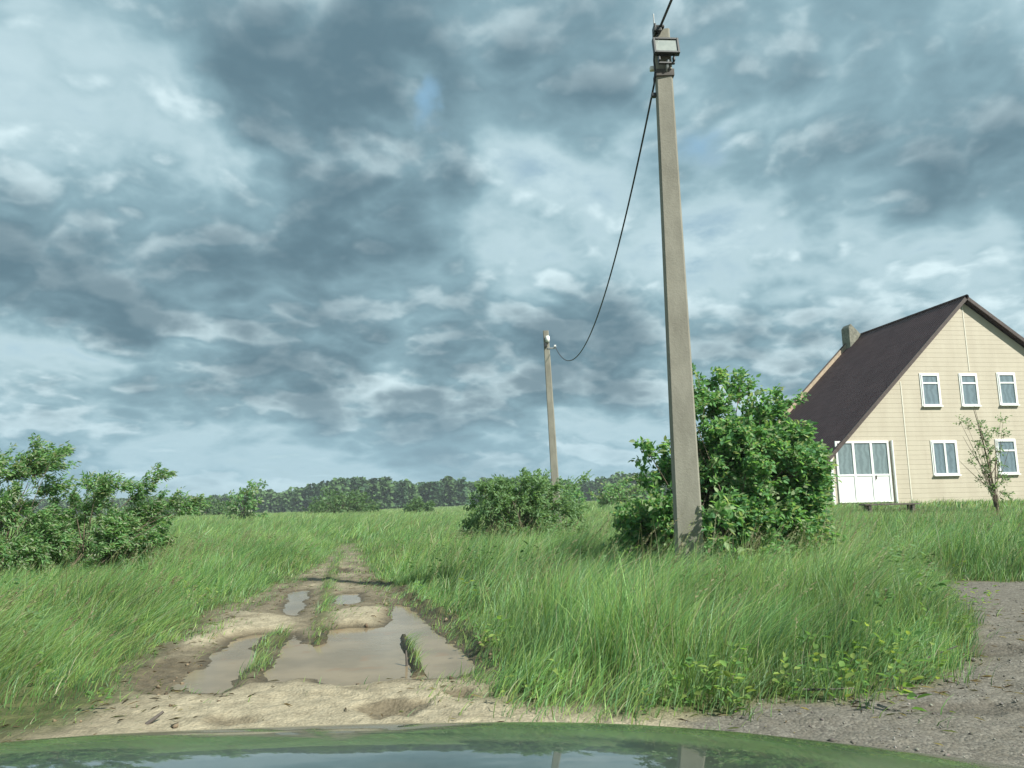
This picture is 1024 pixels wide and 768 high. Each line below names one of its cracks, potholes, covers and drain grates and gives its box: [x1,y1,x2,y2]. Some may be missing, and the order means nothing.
pothole [278,589,313,616]
pothole [329,592,365,604]
pothole [172,632,271,694]
pothole [256,604,483,686]
